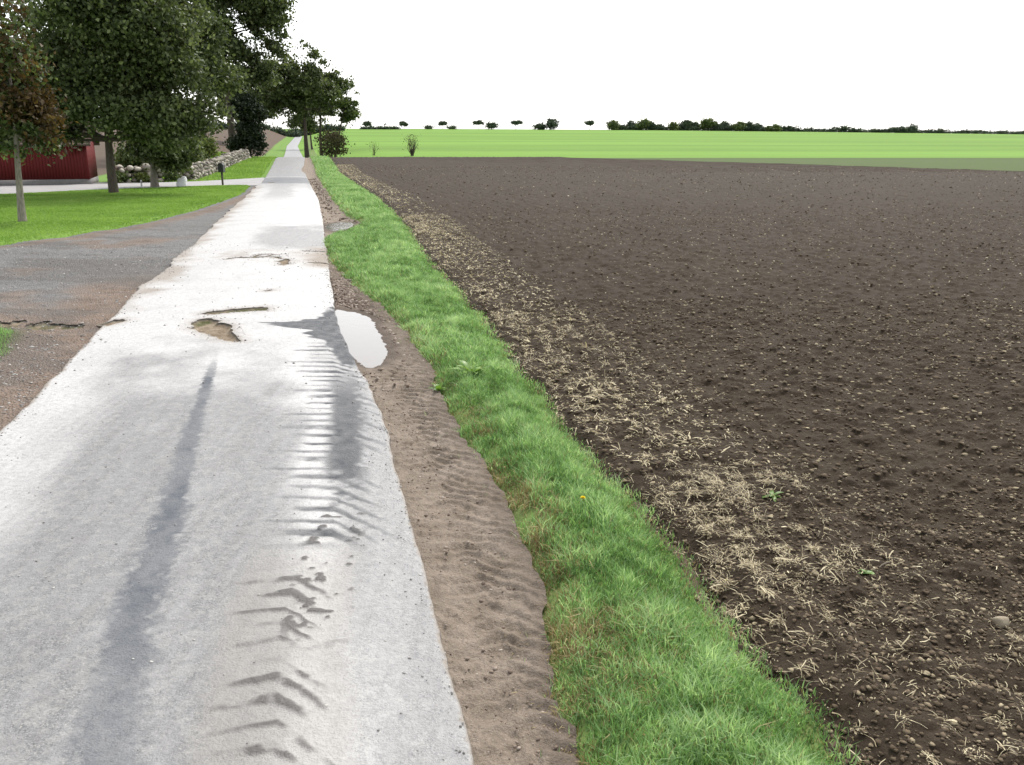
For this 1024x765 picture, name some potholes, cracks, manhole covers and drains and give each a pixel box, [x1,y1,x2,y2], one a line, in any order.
pothole [190,319,241,342]
